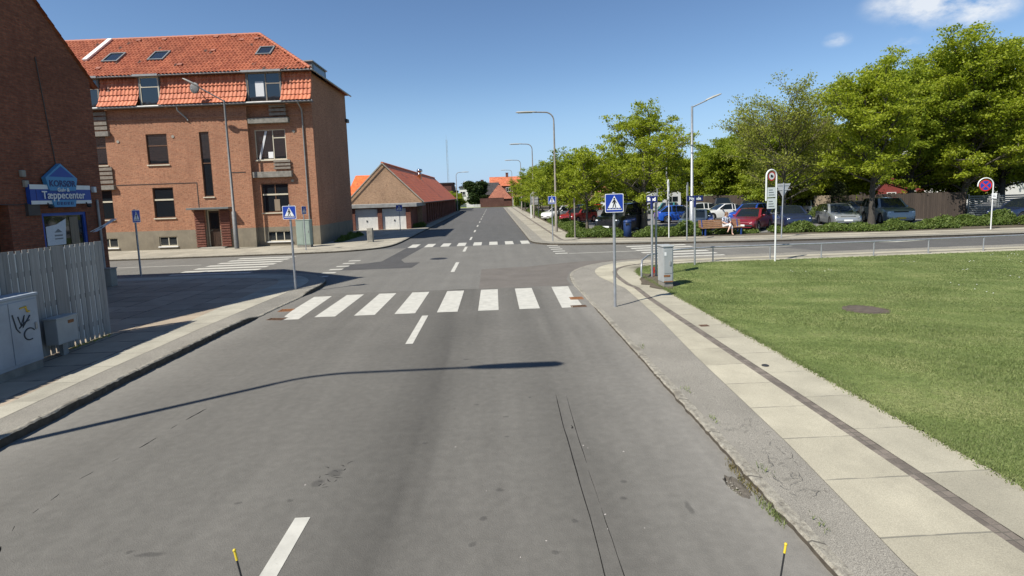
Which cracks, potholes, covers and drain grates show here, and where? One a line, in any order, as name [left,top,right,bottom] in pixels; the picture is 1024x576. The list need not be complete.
pothole [723,475,752,499]
crack [723,418,825,496]
